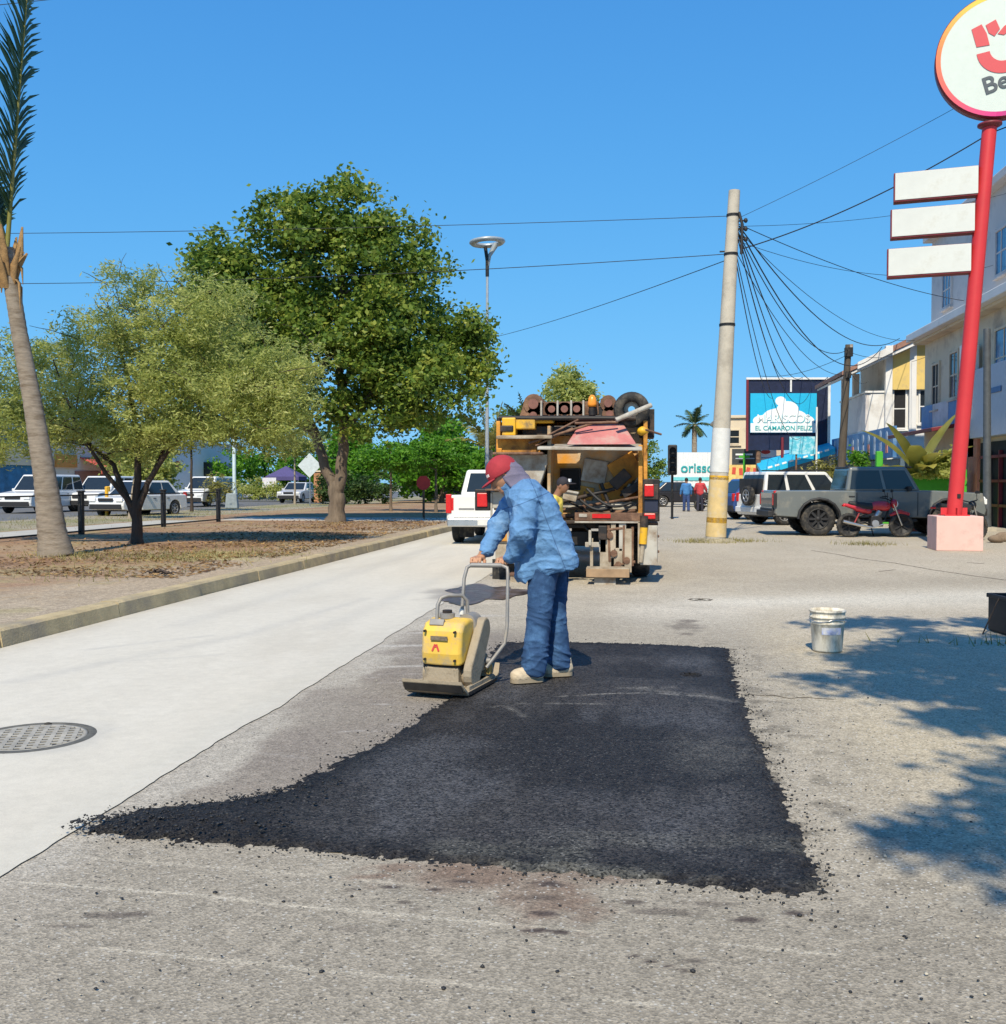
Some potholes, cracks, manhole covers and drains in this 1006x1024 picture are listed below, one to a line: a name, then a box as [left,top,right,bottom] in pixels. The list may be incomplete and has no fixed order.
manhole cover [0,722,97,754]
